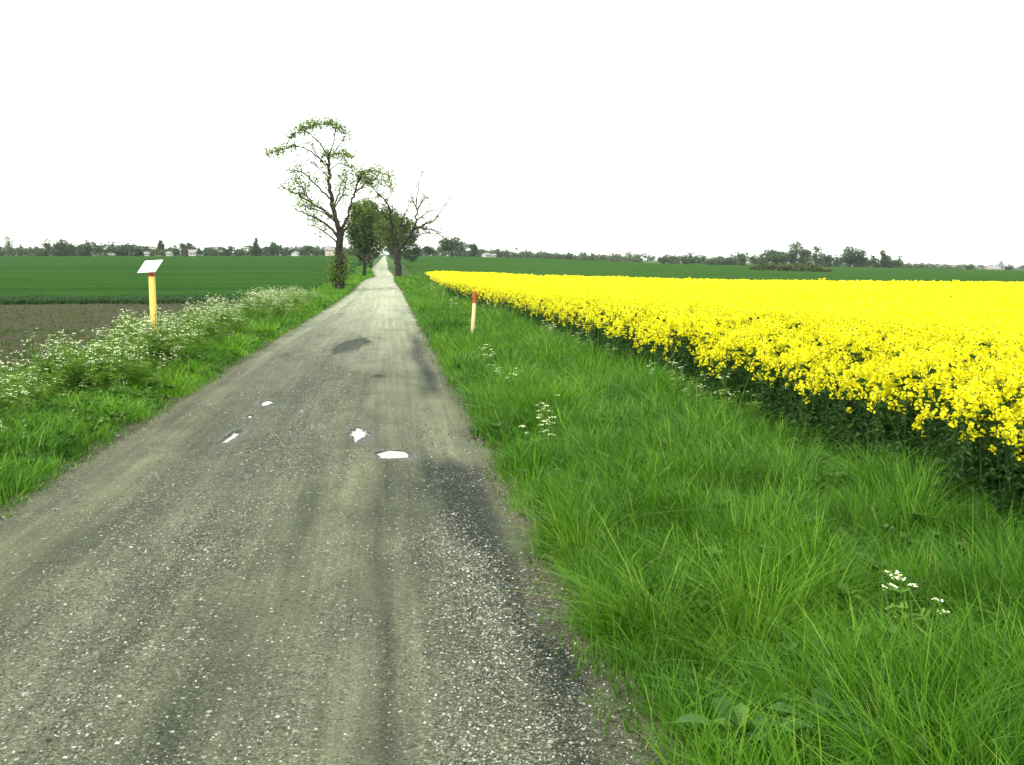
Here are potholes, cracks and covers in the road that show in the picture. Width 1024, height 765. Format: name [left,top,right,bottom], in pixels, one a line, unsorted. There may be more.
pothole [374,450,413,459]
pothole [217,429,244,446]
pothole [346,426,372,444]
